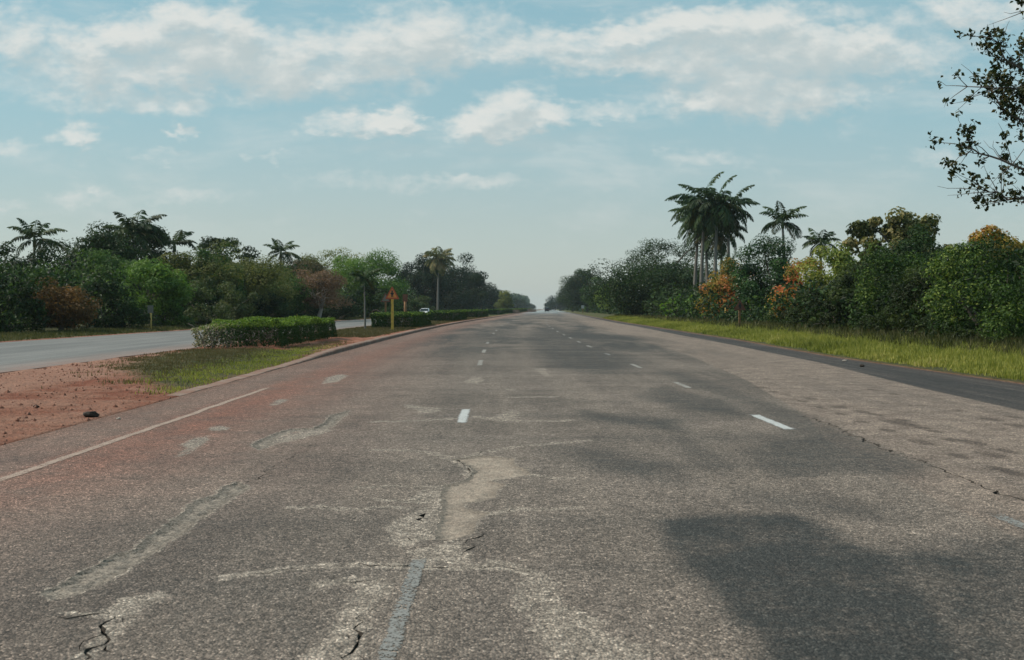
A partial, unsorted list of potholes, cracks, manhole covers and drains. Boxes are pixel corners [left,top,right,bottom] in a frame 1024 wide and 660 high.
crack [396,440,582,476]
crack [43,613,130,660]
crack [233,486,531,585]
crack [337,605,380,660]
